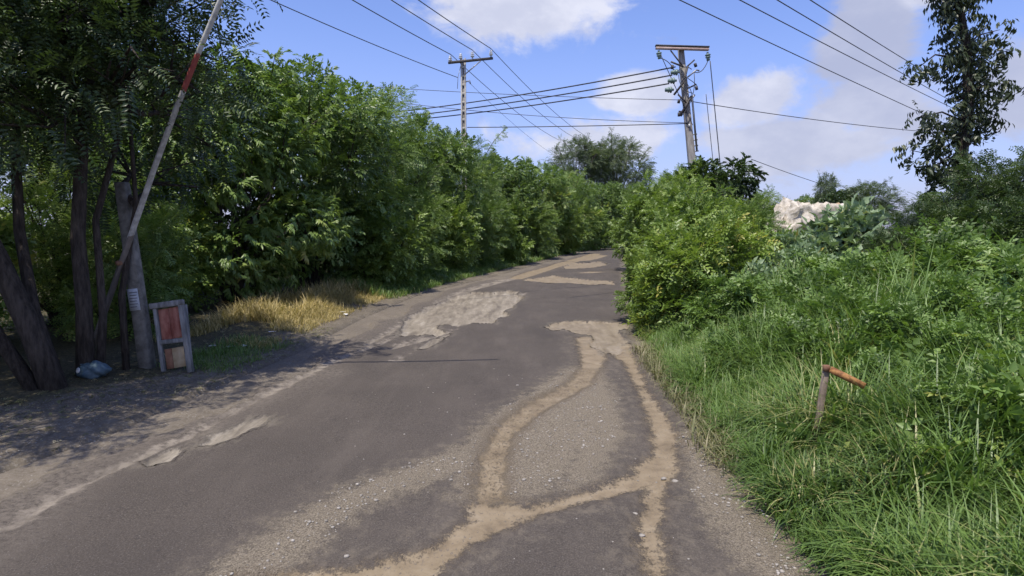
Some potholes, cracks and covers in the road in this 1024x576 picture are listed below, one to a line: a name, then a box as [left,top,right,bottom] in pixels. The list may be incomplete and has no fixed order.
pothole [194,413,274,447]
pothole [138,447,186,467]
